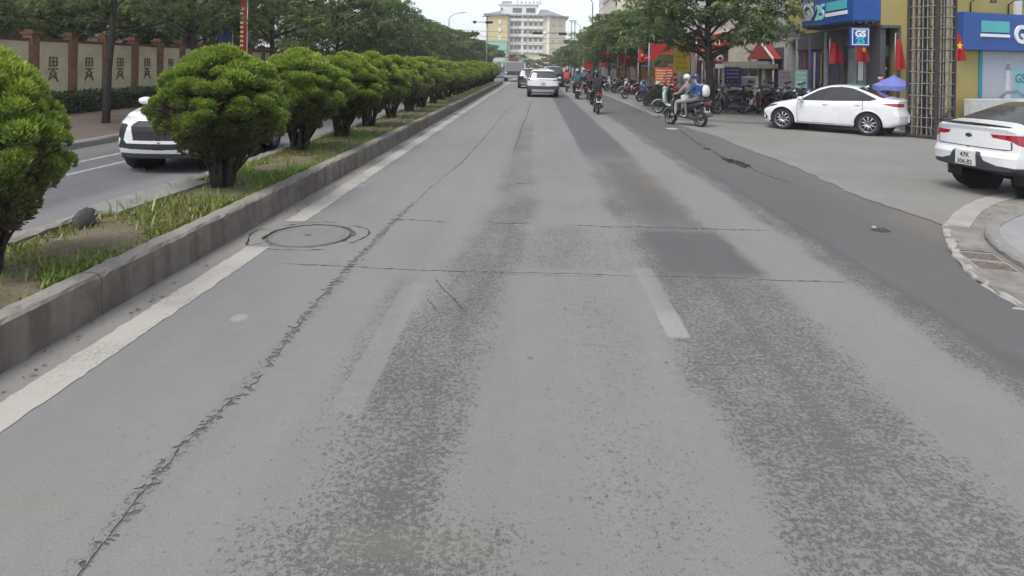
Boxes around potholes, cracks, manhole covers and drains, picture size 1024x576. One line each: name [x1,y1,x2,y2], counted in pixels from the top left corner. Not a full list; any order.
drain grate [960,250,1023,273]
crack [77,107,839,576]
manhole cover [245,221,370,250]
